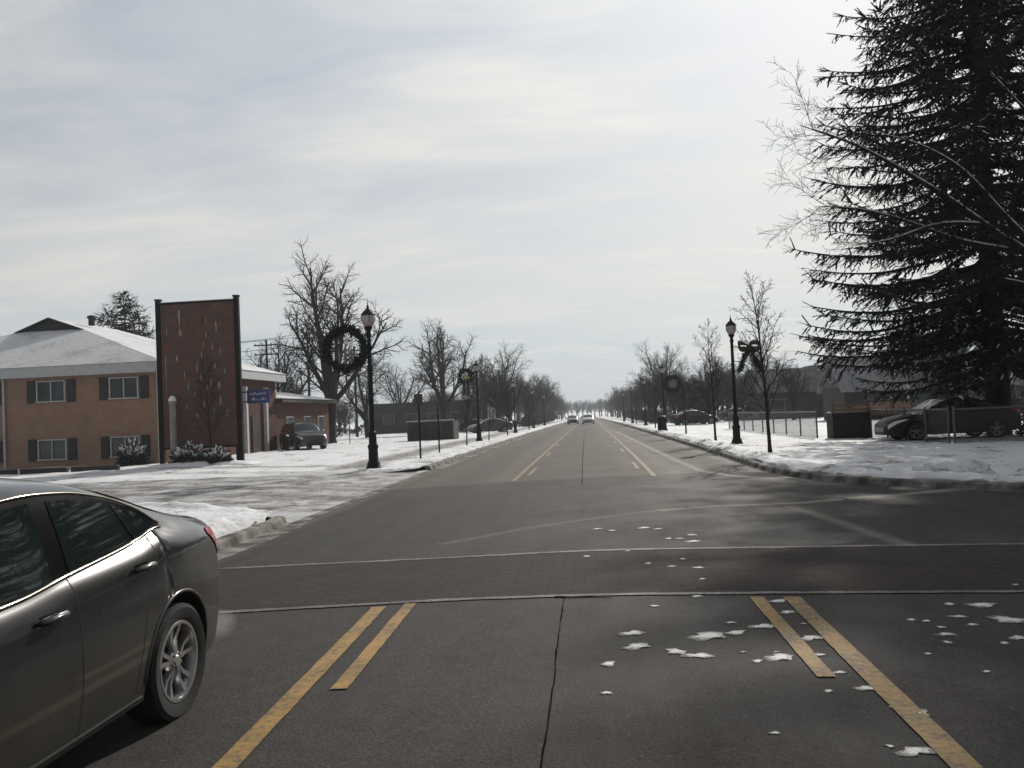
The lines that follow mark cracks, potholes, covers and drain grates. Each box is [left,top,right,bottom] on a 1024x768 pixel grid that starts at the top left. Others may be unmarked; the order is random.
crack [540,595,611,768]
